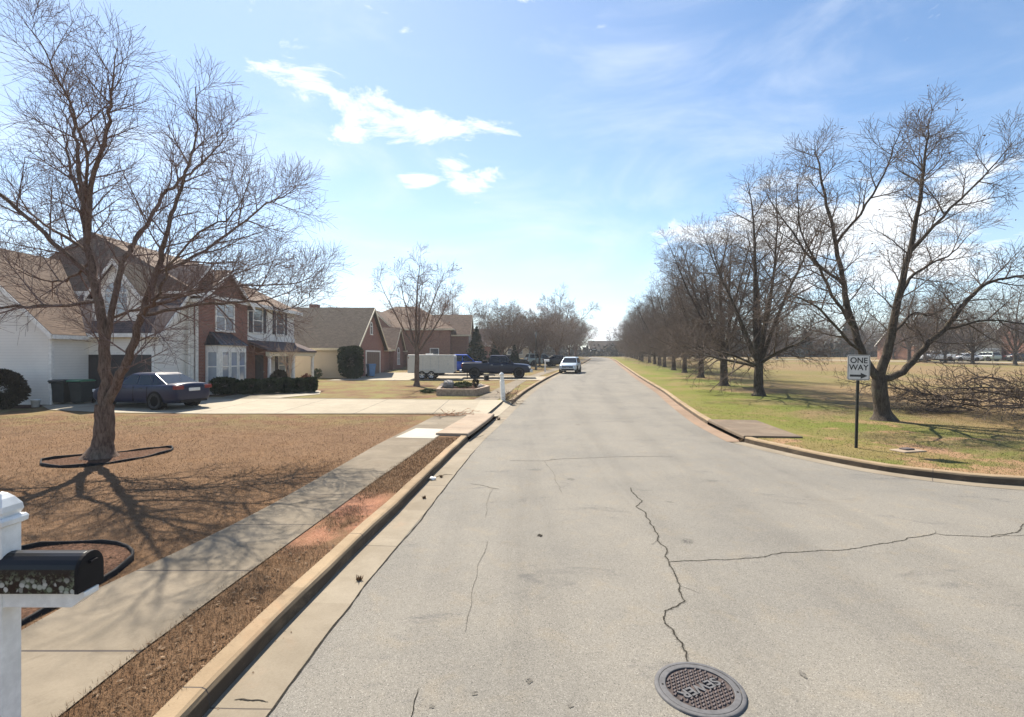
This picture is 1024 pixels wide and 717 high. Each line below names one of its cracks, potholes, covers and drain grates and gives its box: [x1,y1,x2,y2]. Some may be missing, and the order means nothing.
manhole cover [654,662,748,717]
crack [630,487,1024,662]
crack [465,545,487,631]
